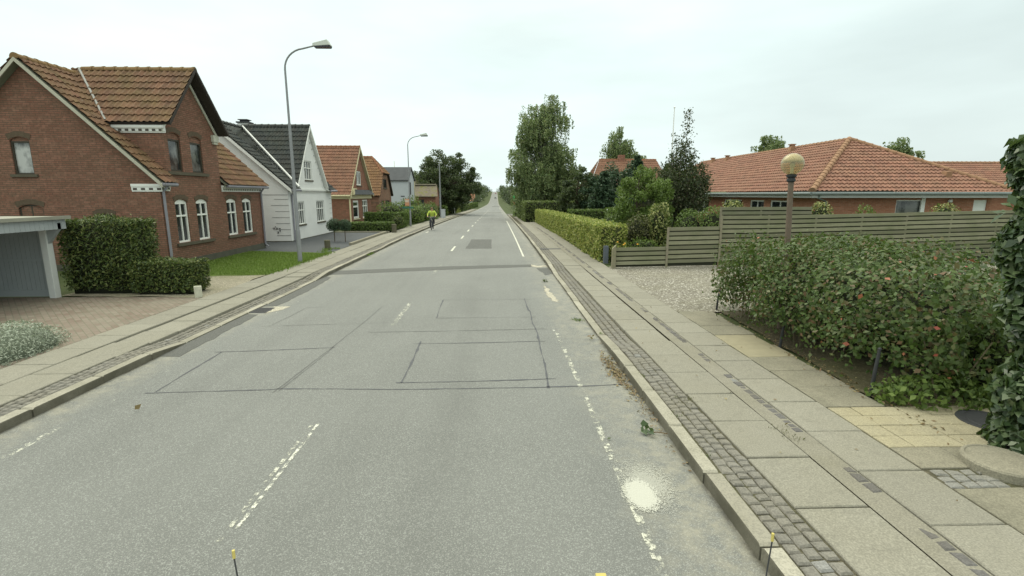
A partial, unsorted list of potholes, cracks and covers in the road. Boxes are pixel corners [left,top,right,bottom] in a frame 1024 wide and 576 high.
manhole cover [955,410,1018,432]
